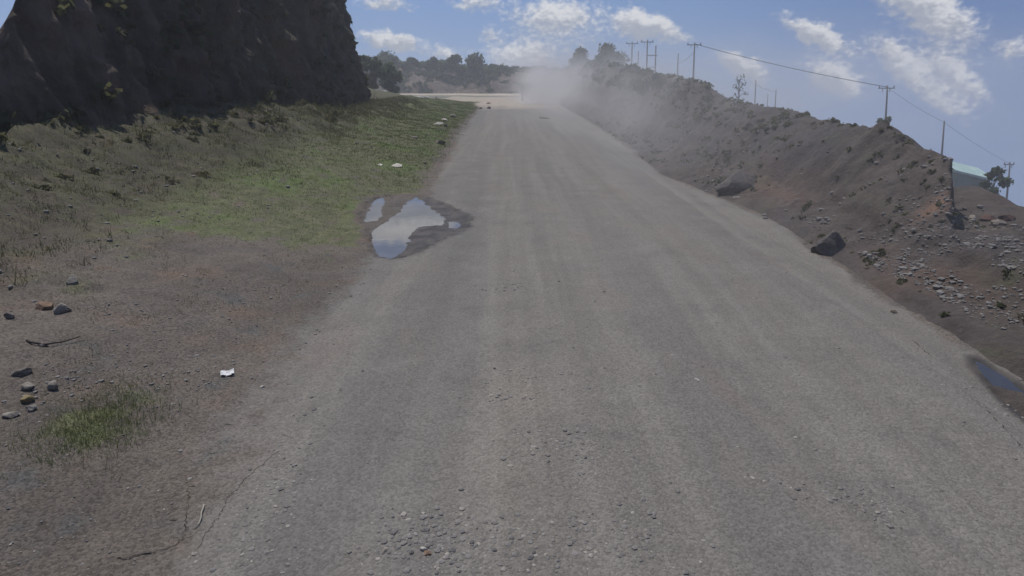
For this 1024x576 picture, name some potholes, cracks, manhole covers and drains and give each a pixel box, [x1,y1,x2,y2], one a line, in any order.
pothole [337,192,490,266]
crack [117,451,279,561]
crack [959,388,1024,450]
